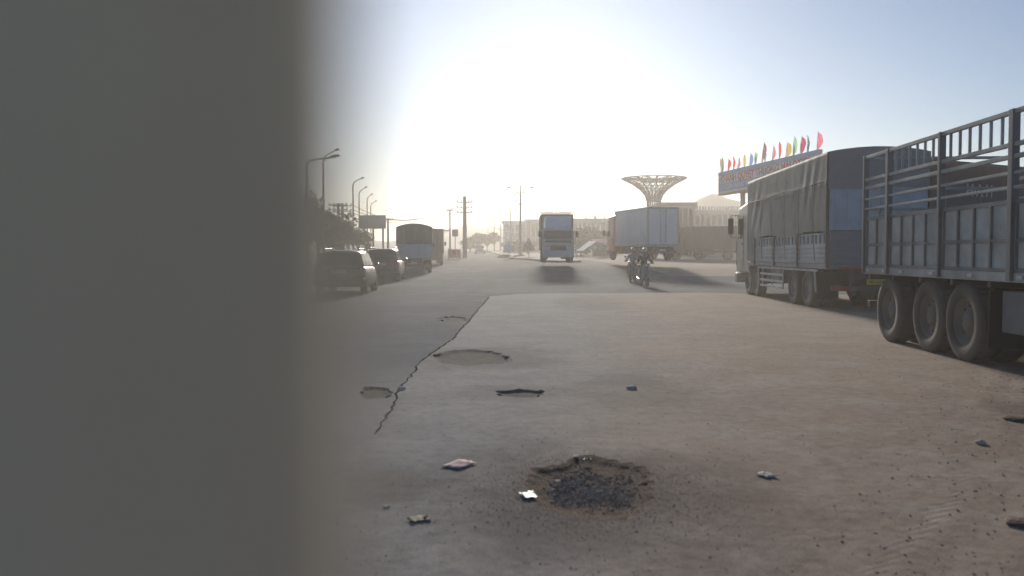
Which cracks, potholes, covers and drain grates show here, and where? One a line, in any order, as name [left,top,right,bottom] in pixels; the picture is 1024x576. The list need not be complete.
pothole [524,455,656,523]
crack [362,297,489,434]
pothole [362,386,393,399]
pothole [494,388,546,398]
pothole [430,349,513,366]
